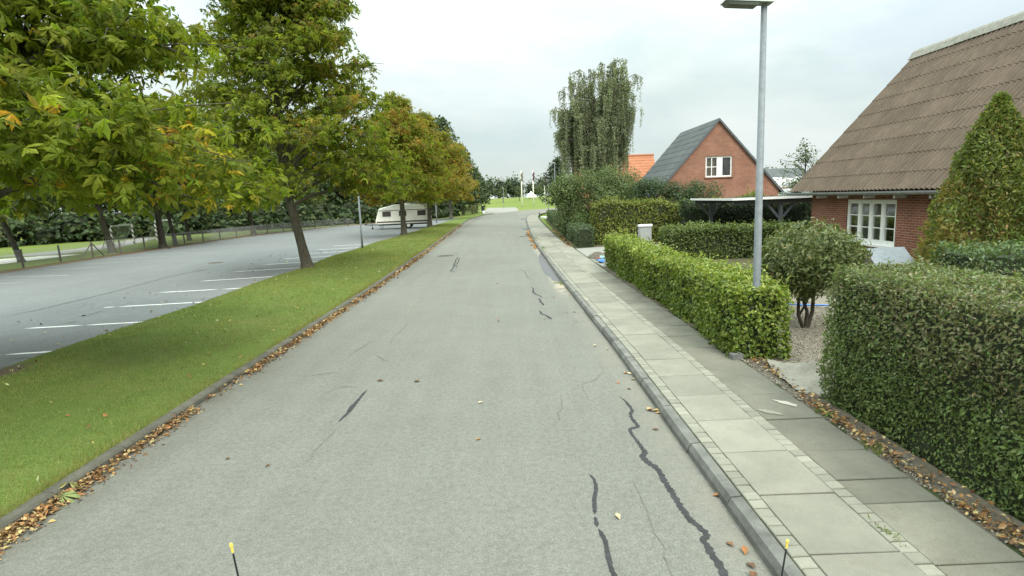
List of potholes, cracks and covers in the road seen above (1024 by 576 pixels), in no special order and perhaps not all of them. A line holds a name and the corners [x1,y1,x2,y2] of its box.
crack [633,482,673,576]
